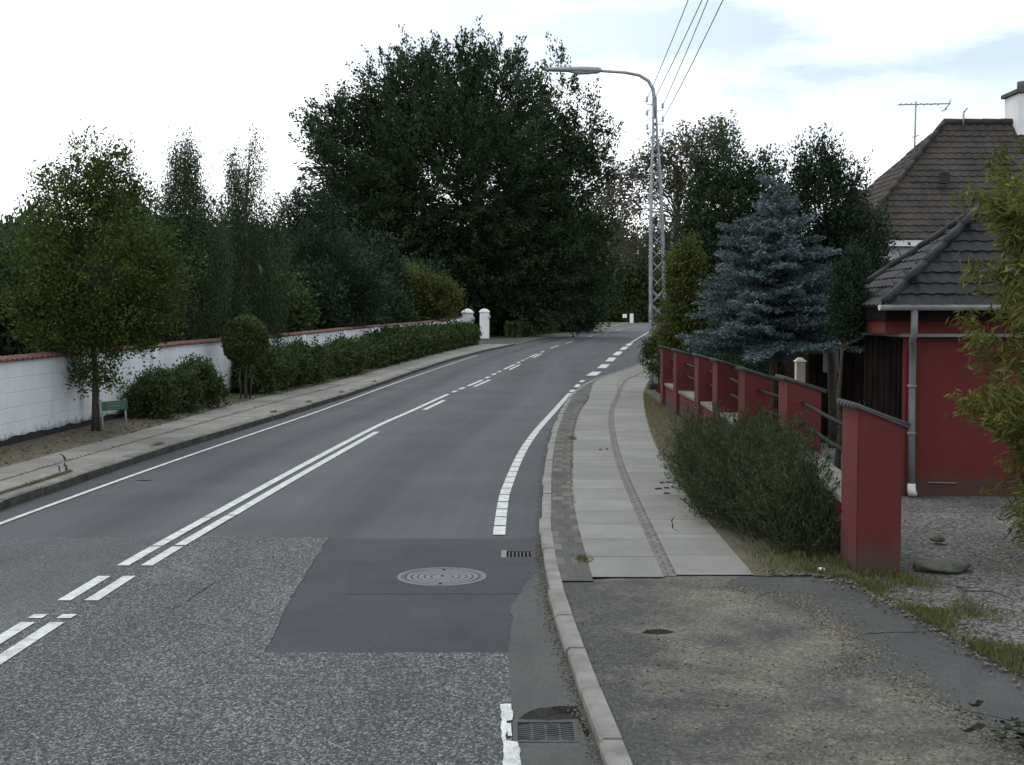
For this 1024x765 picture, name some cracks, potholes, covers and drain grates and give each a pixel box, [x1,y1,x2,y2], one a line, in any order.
manhole cover [397,567,487,586]
drain grate [513,720,580,742]
